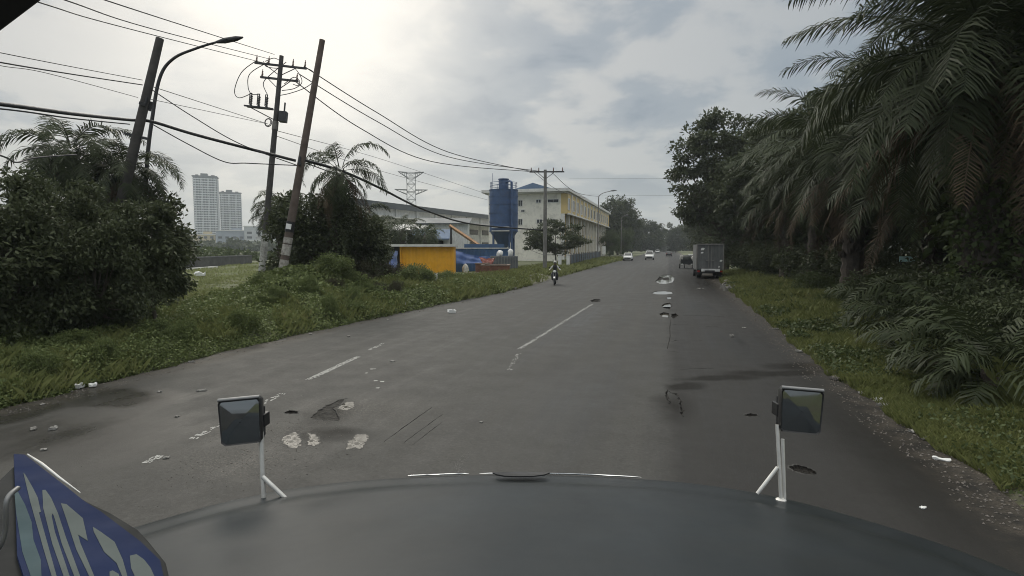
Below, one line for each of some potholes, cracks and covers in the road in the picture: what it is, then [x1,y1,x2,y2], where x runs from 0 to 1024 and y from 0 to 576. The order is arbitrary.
pothole [655,275,675,284]
crack [665,390,685,417]
pothole [787,464,819,475]
pothole [309,398,347,421]
